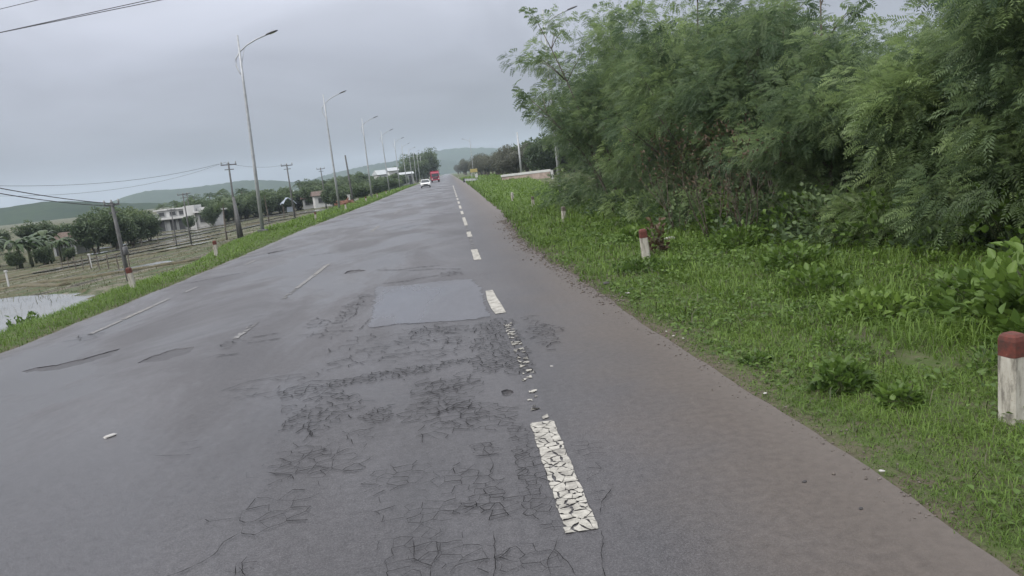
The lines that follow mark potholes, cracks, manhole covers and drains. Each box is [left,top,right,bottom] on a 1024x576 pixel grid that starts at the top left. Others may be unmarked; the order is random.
pothole [139,347,194,363]
crack [169,294,575,576]
crack [573,441,613,576]
pothole [22,349,119,373]
